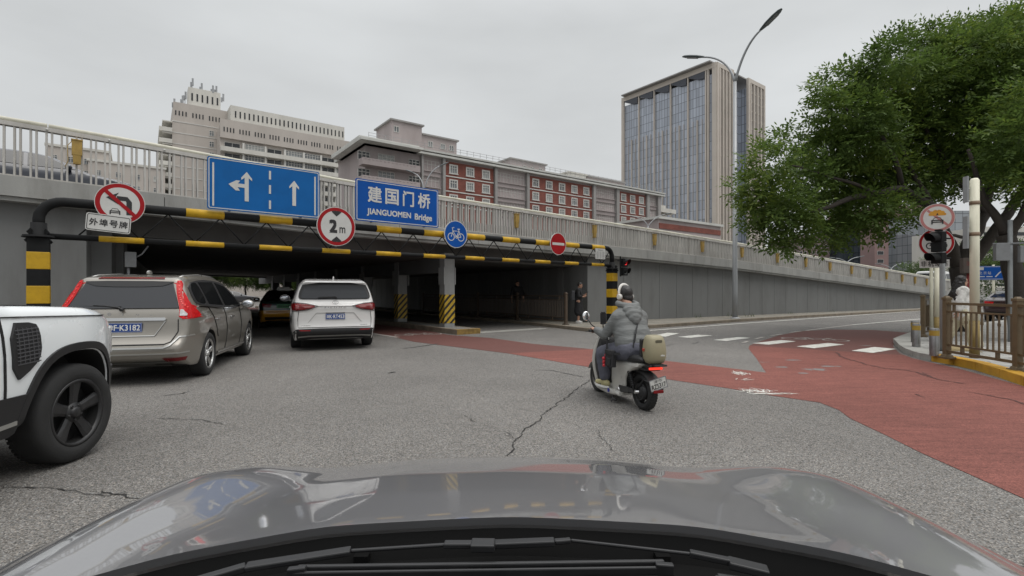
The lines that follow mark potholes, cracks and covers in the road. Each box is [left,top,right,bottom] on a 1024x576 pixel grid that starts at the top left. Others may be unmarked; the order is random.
crack [835,352,1023,404]
crack [441,370,589,456]
crack [2,486,131,498]
